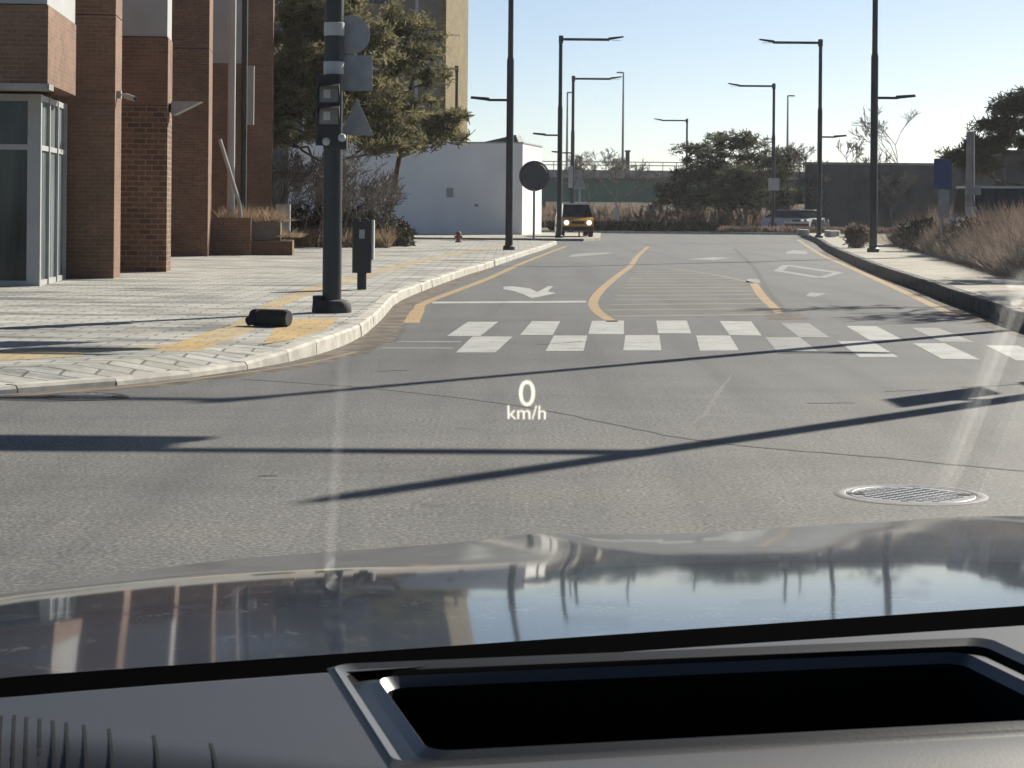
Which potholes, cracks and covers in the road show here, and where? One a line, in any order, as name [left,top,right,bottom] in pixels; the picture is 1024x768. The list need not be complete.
manhole cover [834,484,989,506]
crack [249,379,1024,471]
